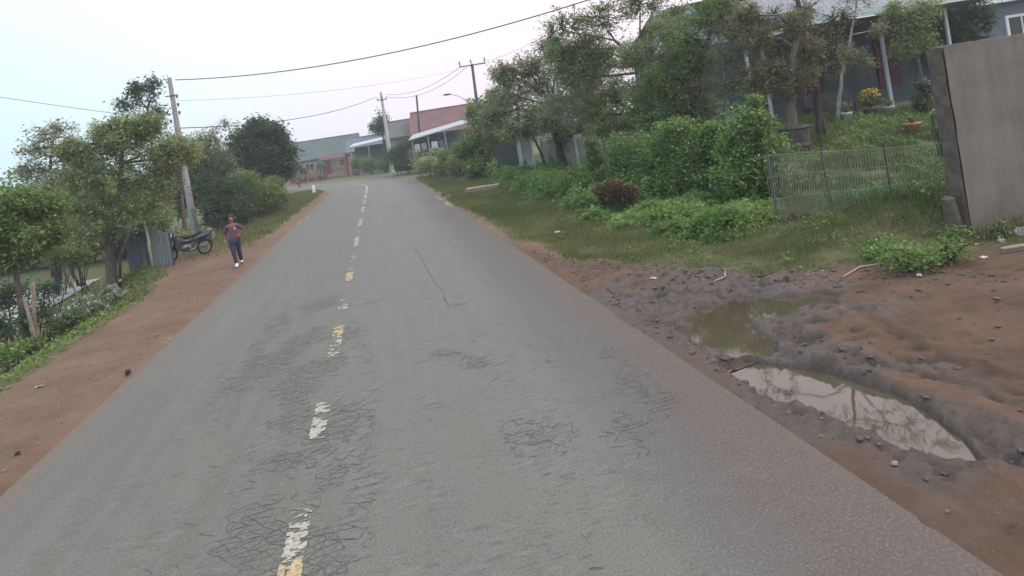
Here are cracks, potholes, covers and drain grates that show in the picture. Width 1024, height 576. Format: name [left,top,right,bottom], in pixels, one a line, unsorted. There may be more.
crack [498,418,604,568]
crack [415,248,466,308]
crack [416,337,510,401]
crack [524,336,680,457]
